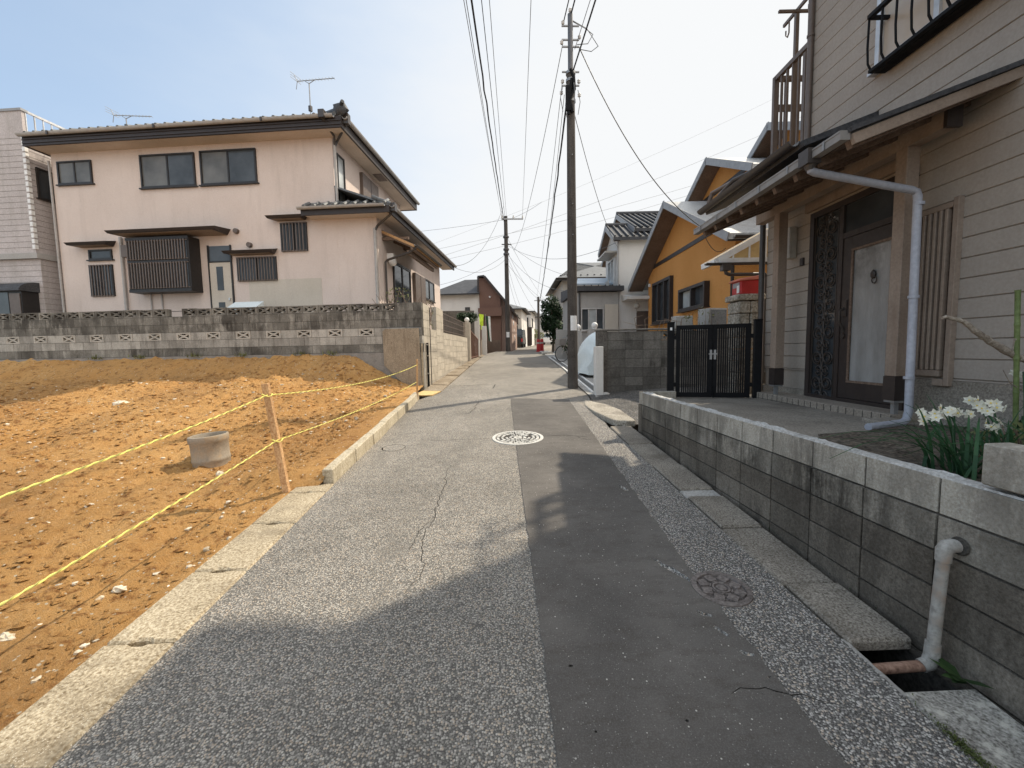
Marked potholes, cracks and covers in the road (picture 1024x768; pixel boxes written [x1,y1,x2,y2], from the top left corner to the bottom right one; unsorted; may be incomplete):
manhole cover [691,571,753,607]
crack [731,687,828,703]
manhole cover [492,431,543,445]
crack [406,474,447,592]
